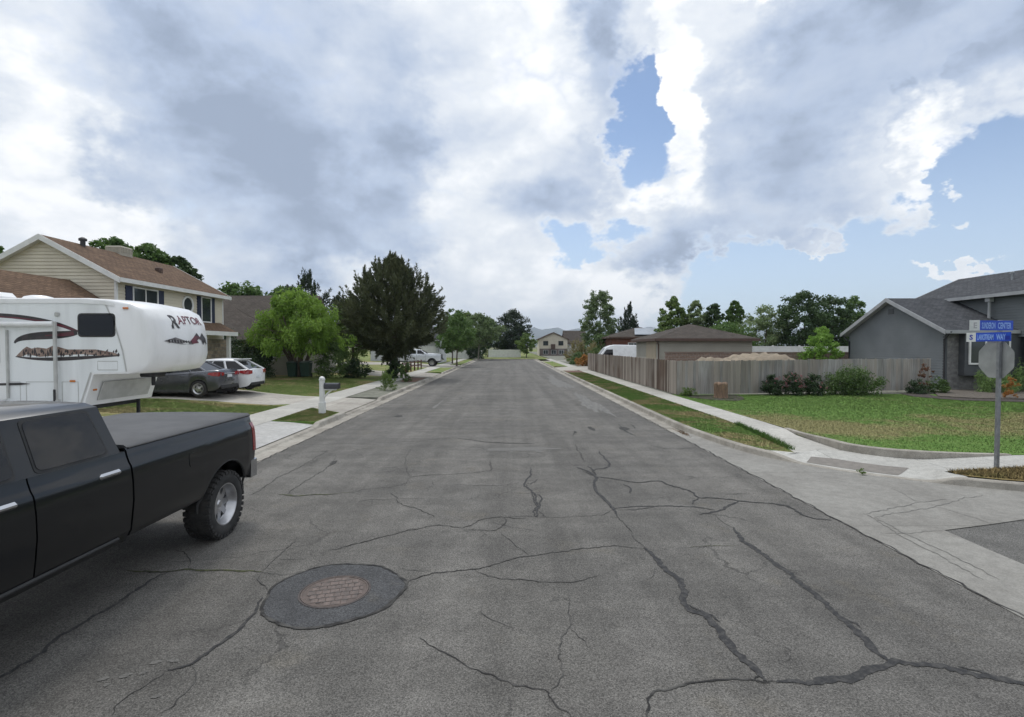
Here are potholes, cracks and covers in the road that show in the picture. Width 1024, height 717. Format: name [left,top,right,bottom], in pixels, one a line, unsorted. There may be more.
manhole cover [298,575,371,609]
crack [702,493,746,528]
crack [0,538,297,715]
crack [253,437,645,717]
